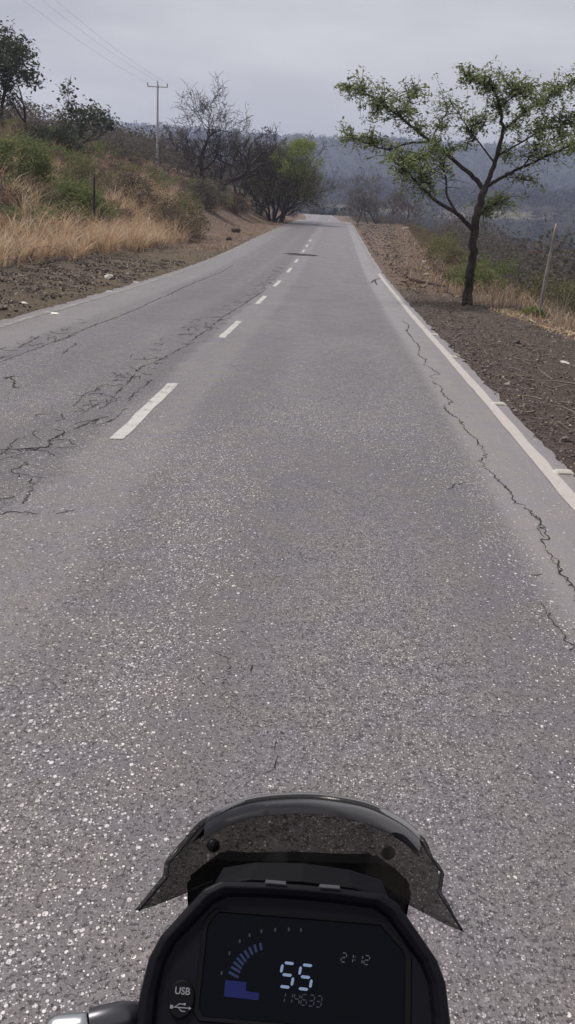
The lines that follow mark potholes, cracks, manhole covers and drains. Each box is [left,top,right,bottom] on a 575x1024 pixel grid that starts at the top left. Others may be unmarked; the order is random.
crack [200,653,284,774]
crack [404,322,575,651]
crack [0,267,283,514]
